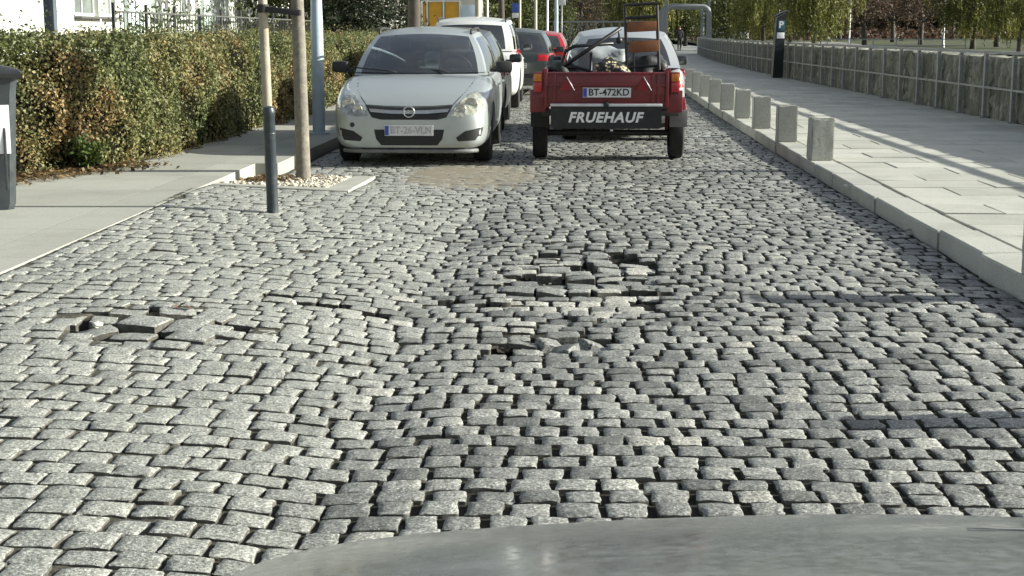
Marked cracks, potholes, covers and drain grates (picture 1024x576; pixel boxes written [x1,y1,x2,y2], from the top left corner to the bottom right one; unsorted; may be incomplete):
pothole [500,252,665,320]
pothole [70,307,249,345]
pothole [496,331,616,358]
pothole [491,348,515,358]
